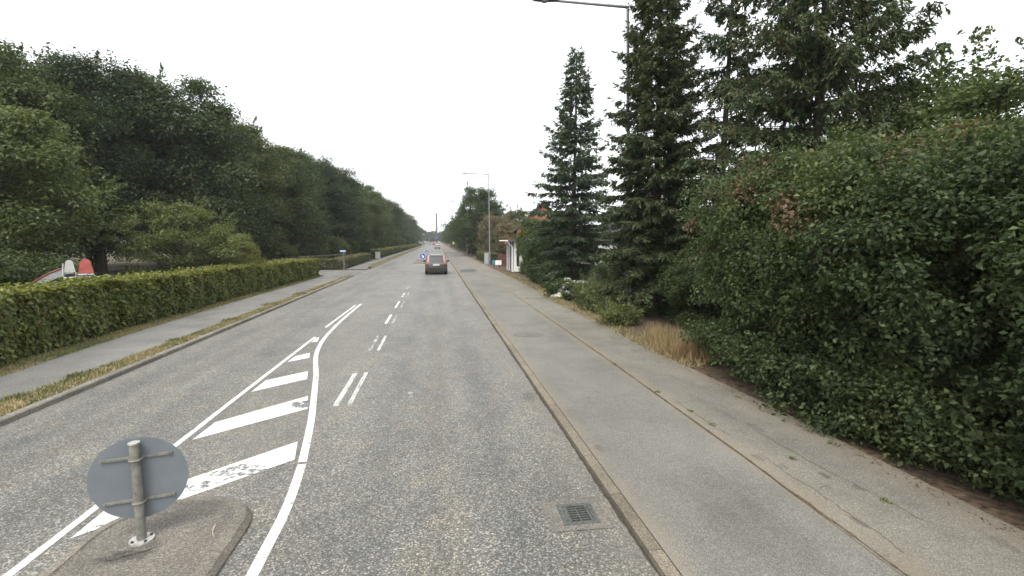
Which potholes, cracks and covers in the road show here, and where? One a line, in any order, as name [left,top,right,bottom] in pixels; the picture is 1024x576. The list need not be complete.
drain grate [541,496,615,532]
crack [755,430,923,520]
